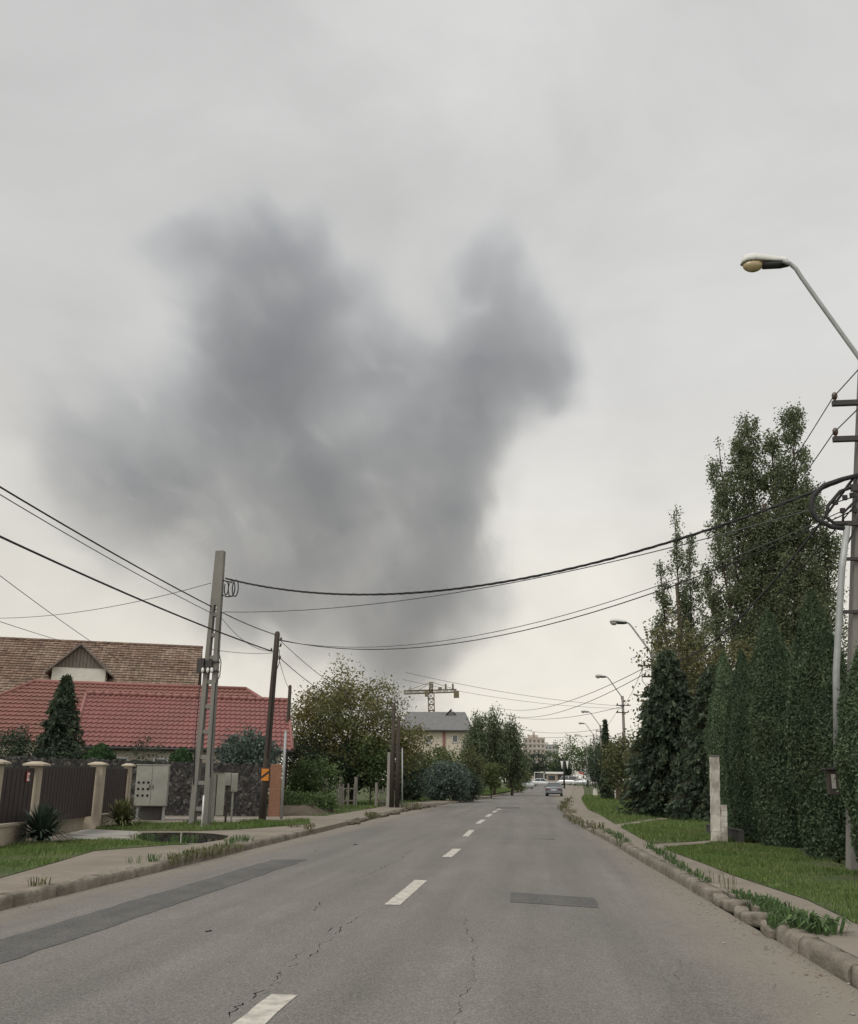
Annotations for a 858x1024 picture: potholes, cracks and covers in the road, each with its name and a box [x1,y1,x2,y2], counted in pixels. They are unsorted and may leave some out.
crack [454,918,477,1024]
crack [228,902,358,1018]
